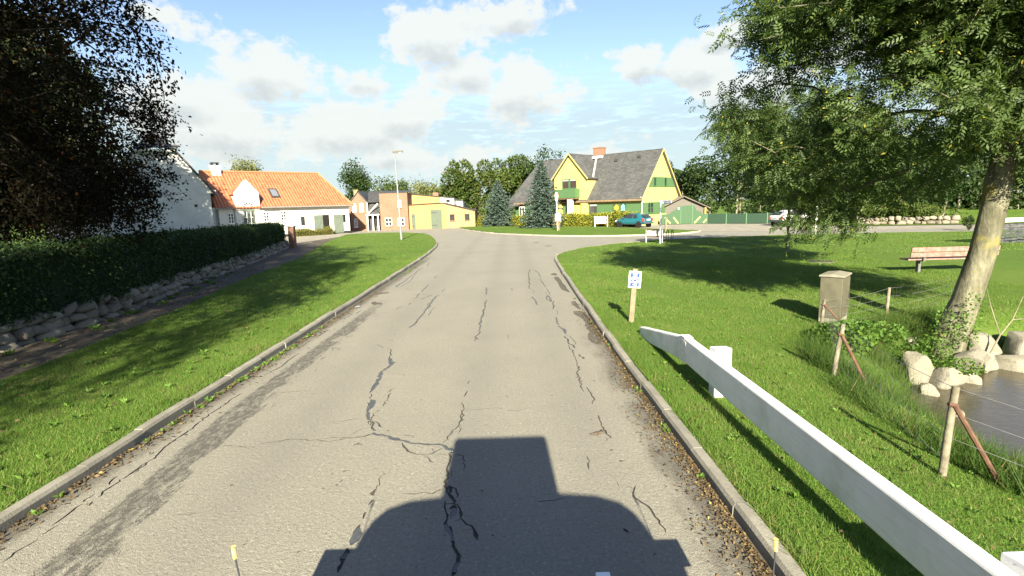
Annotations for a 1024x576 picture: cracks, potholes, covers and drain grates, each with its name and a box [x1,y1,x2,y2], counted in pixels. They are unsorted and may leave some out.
crack [474,287,488,341]
crack [617,482,666,533]
crack [511,271,611,469]
crack [403,335,525,576]
